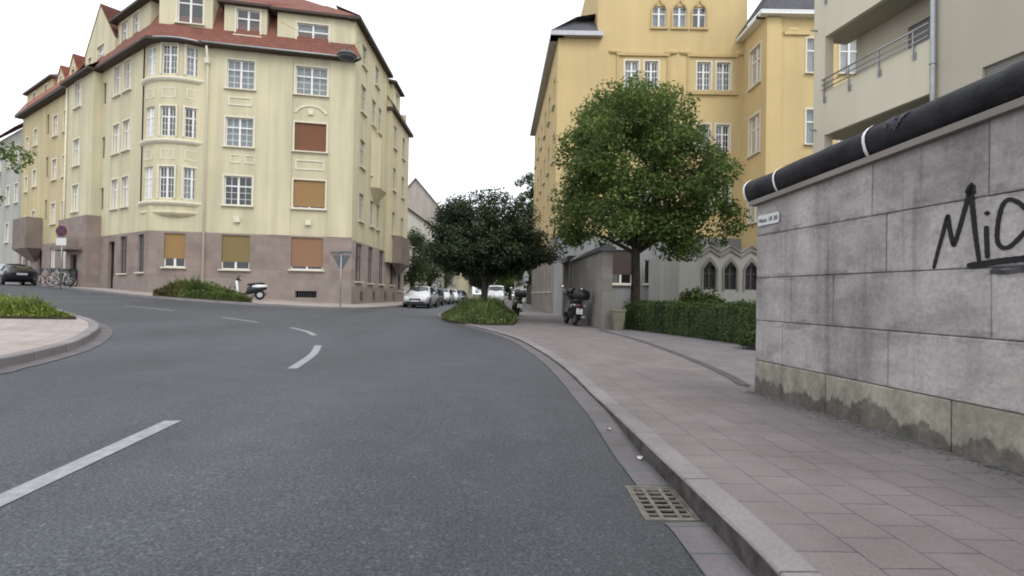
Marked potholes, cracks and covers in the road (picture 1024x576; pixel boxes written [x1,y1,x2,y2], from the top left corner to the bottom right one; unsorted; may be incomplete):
drain grate [625,486,701,522]
